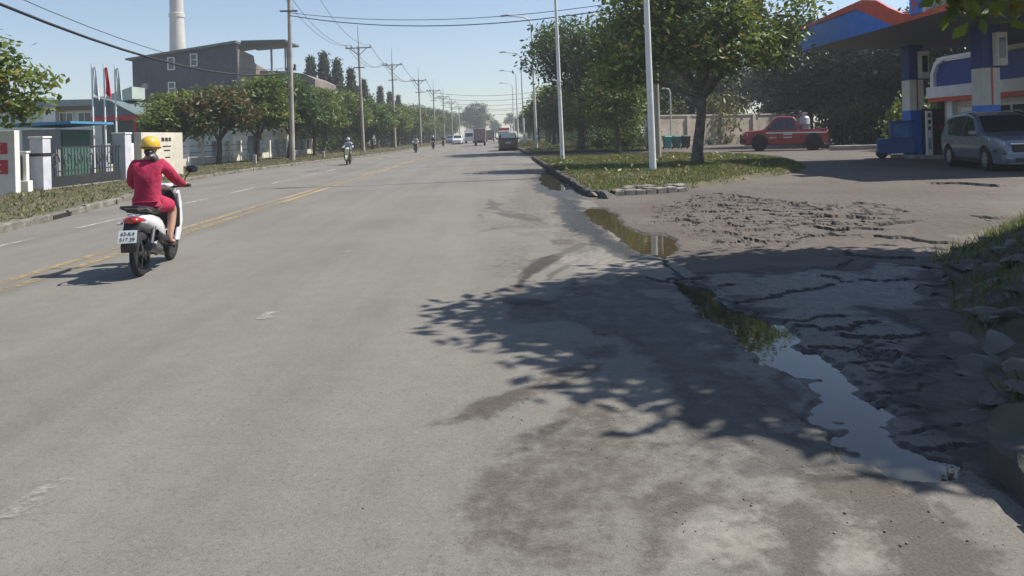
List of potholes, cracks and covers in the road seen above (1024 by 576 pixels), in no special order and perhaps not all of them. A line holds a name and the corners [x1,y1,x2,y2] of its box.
pothole [580,207,682,256]
pothole [671,280,969,479]
crack [645,193,967,460]
